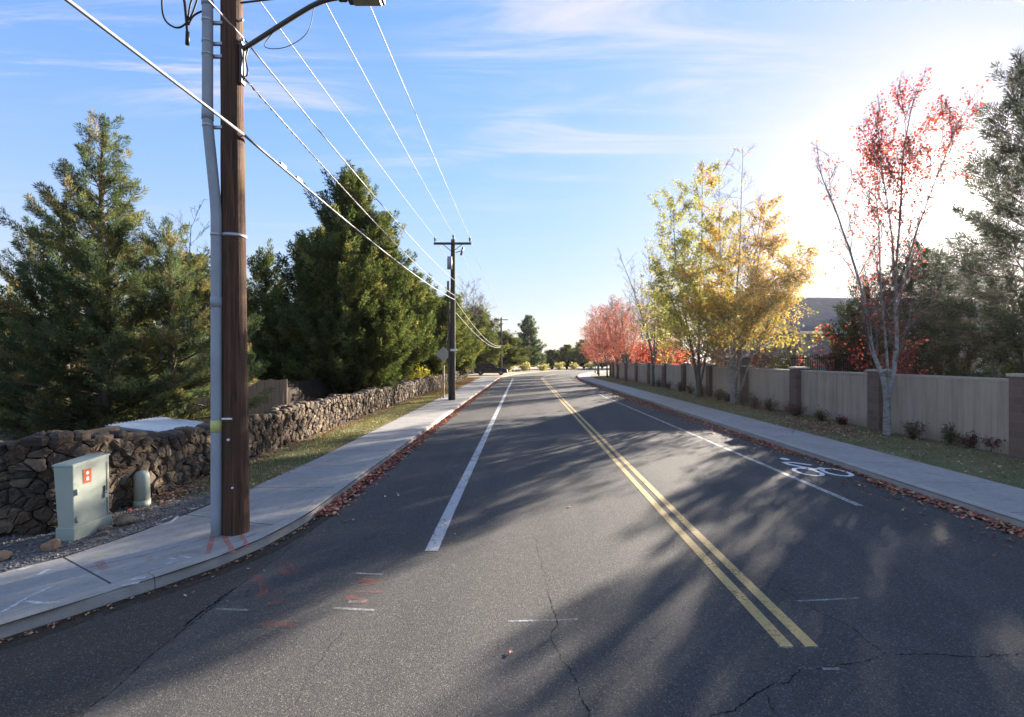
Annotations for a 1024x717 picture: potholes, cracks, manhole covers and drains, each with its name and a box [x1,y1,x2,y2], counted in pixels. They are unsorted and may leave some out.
crack [532,533,590,717]
crack [710,588,1023,717]
